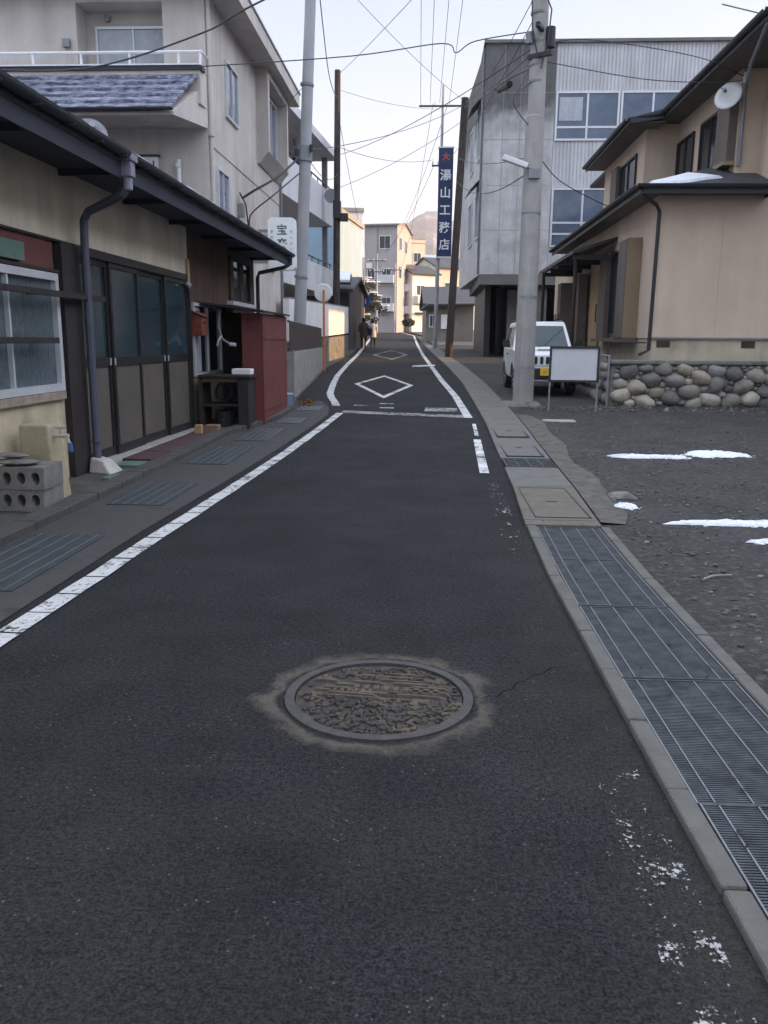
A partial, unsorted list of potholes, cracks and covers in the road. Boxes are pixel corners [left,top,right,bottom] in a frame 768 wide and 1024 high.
drain grate [622,678,768,805]
drain grate [502,458,557,468]
drain grate [235,428,285,441]
drain grate [579,606,735,681]
crack [486,664,583,697]
drain grate [552,558,667,608]
manhole cover [285,660,473,742]
drain grate [106,482,197,506]
drain grate [537,527,625,560]
drain grate [0,533,106,592]
drain grate [698,803,768,920]
drain grate [186,446,253,465]
